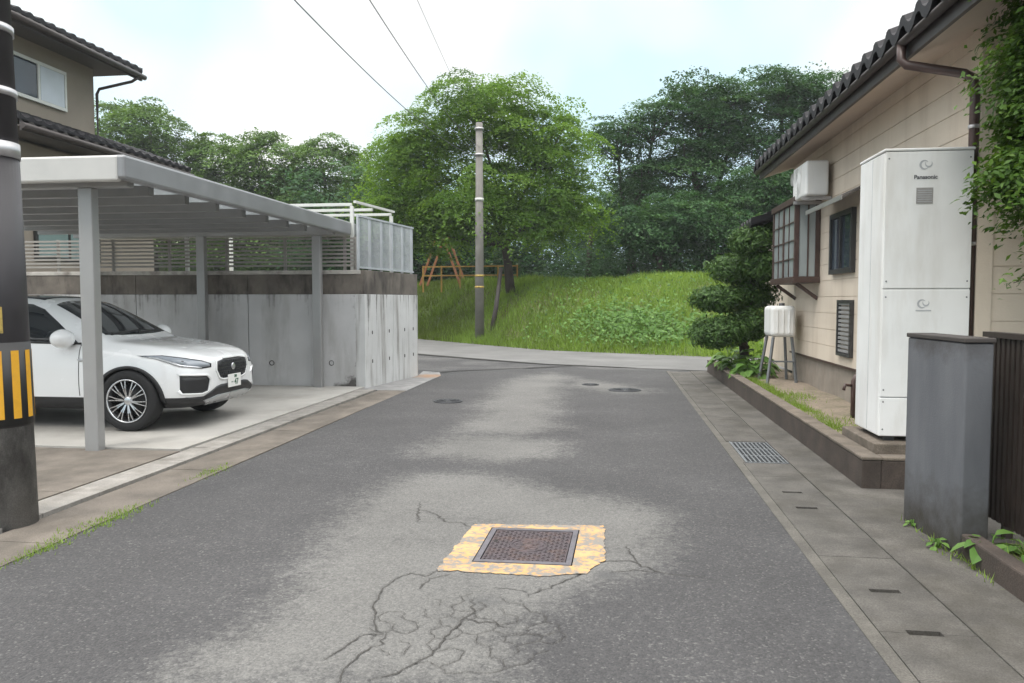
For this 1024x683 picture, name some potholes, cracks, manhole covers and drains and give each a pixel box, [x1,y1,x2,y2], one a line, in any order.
drain grate [729,441,789,464]
crack [603,547,700,577]
manhole cover [473,528,578,566]
crack [495,573,581,596]
crack [326,570,566,683]
